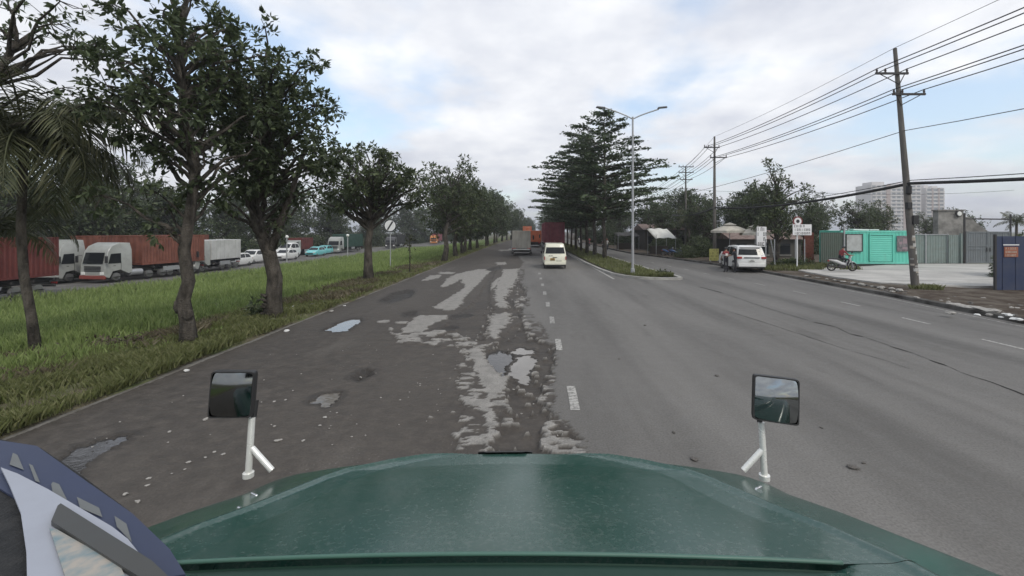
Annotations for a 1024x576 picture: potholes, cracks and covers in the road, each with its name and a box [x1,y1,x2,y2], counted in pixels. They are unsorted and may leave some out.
pothole [349,369,375,382]
pothole [483,323,586,454]
pothole [380,289,415,303]
